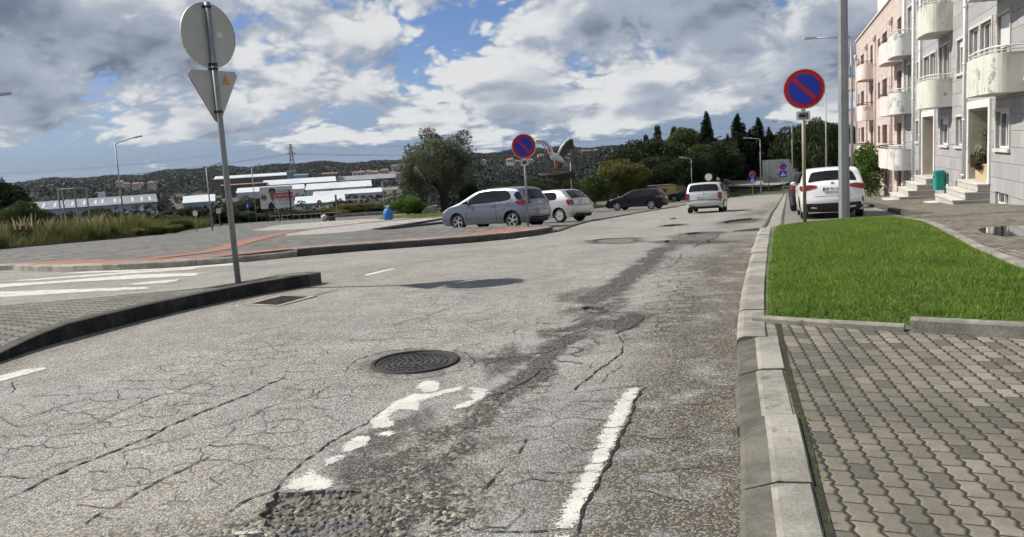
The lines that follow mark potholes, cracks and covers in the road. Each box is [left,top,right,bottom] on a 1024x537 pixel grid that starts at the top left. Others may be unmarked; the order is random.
drain grate [243,294,317,307]
manhole cover [370,350,460,374]
crack [0,234,728,537]
